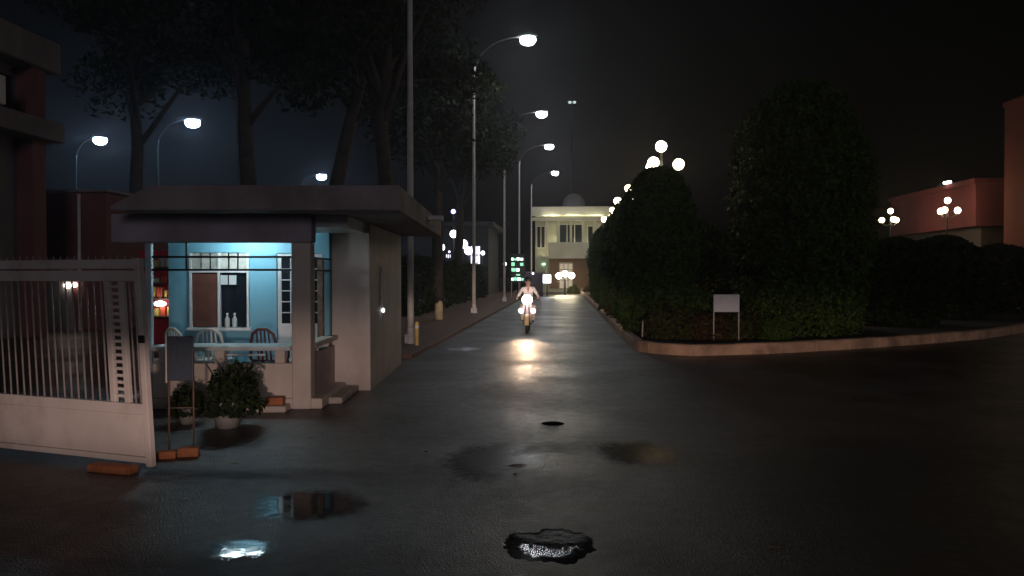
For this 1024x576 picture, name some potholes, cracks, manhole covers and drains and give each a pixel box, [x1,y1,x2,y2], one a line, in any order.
pothole [503,528,597,565]
